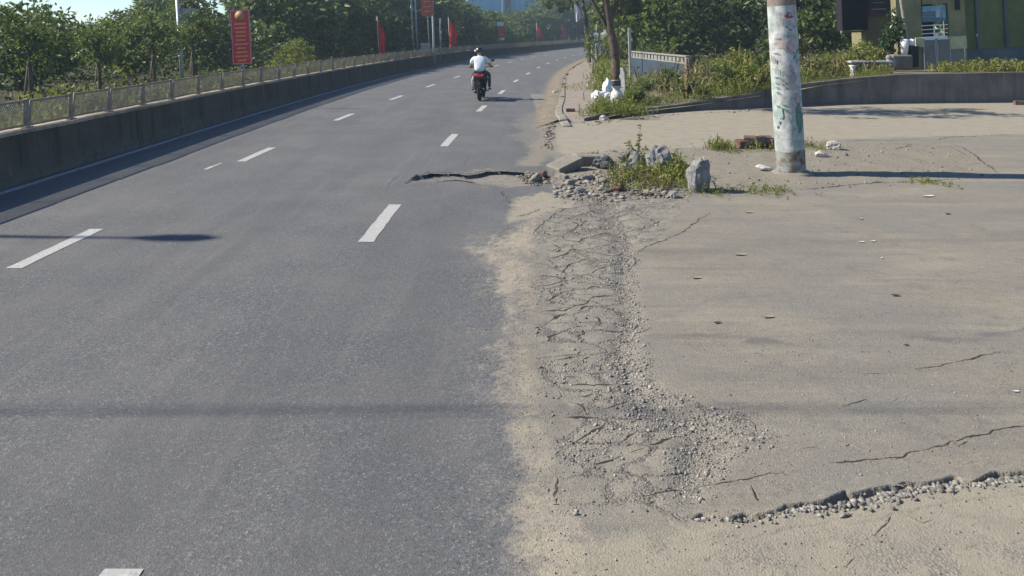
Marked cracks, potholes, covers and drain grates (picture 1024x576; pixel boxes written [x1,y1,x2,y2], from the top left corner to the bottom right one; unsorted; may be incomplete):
crack [848,134,1024,172]
crack [418,158,1024,538]
